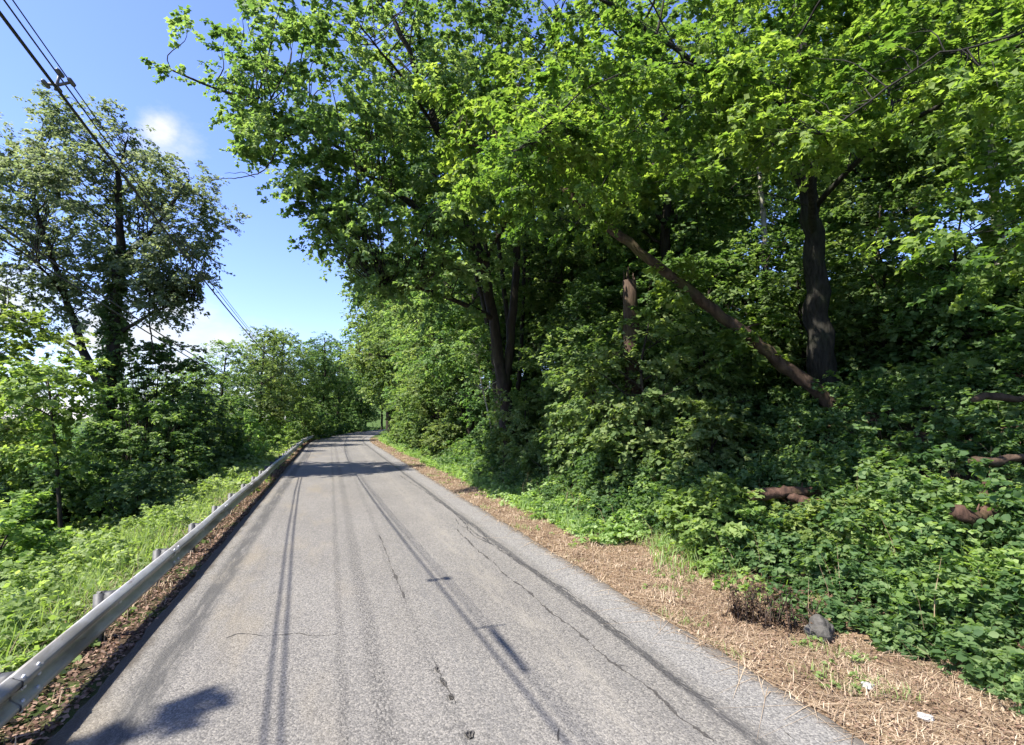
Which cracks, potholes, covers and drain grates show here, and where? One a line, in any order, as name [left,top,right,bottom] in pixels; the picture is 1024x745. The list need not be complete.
crack [398,474,714,741]
crack [378,535,406,601]
